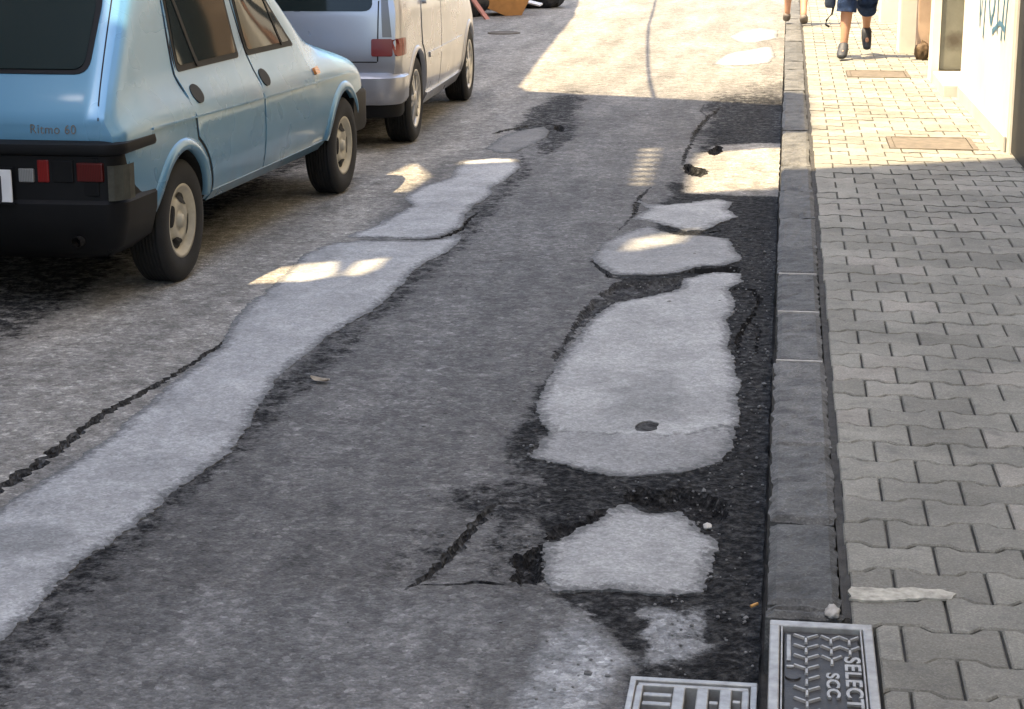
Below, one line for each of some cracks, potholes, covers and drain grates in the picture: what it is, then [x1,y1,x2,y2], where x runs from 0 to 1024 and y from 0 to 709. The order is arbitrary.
crack [0,341,223,494]
pothole [543,509,608,541]
drain grate [624,676,757,709]
pothole [509,544,544,587]
crack [617,187,652,231]
pothole [707,145,723,156]
manhole cover [846,70,911,80]
pothole [682,164,709,178]
pothole [619,486,730,528]
crack [681,104,723,165]
crack [404,498,555,590]
